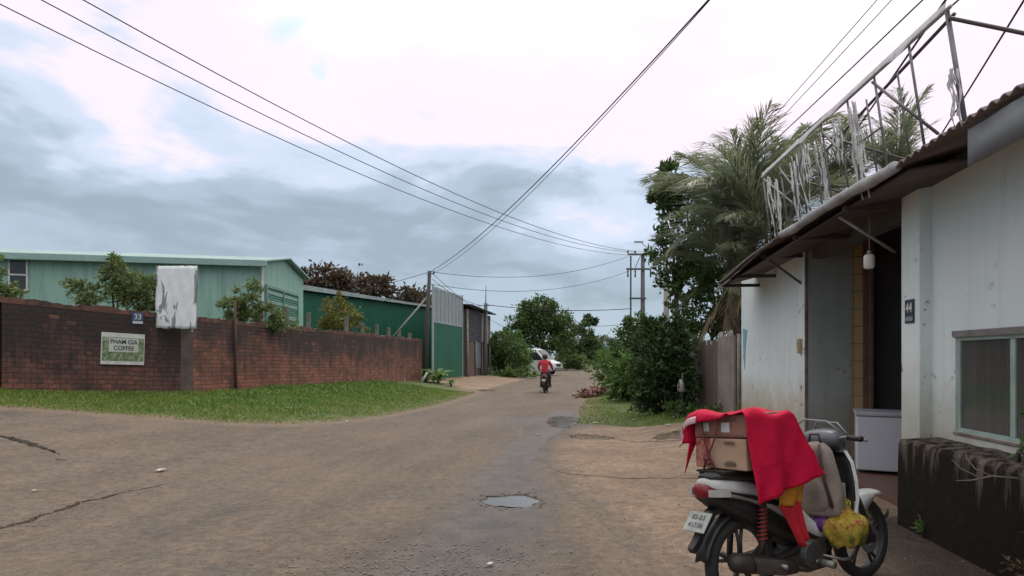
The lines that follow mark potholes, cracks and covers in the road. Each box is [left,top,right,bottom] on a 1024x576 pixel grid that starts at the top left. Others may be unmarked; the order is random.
crack [557,471,695,479]
pothole [546,416,582,428]
crack [0,483,169,530]
crack [0,435,62,460]
pothole [651,429,681,441]
pothole [472,491,546,511]
